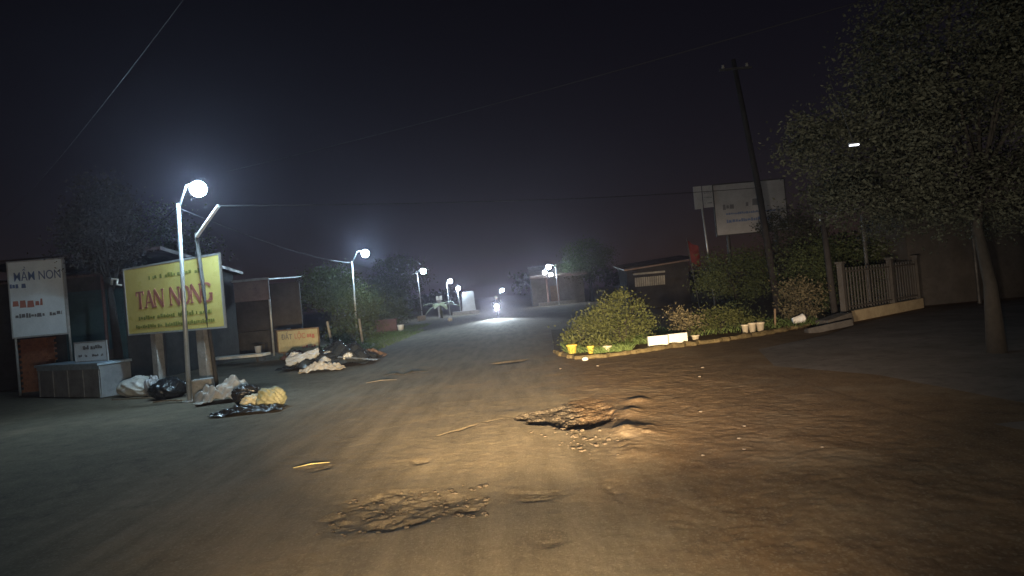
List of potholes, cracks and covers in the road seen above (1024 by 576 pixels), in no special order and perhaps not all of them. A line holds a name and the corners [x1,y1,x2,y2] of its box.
pothole [312,484,501,540]
pothole [513,398,626,459]
